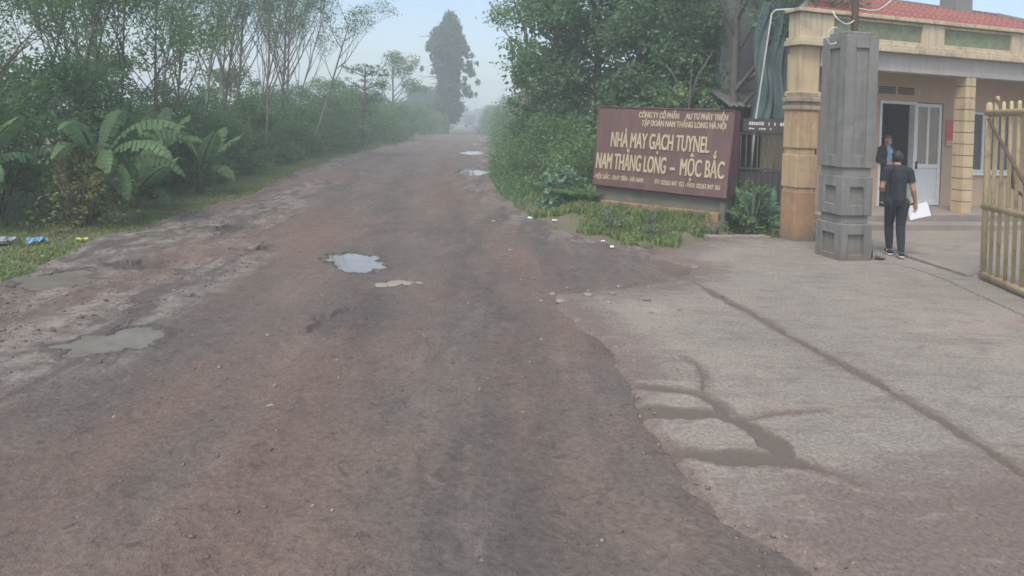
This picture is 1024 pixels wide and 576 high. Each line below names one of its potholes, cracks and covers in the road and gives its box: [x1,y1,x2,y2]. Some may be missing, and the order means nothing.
pothole [0,266,114,294]
pothole [29,323,184,362]
pothole [92,255,170,272]
pothole [312,251,392,276]
crack [629,263,1024,494]
pothole [446,169,490,177]
